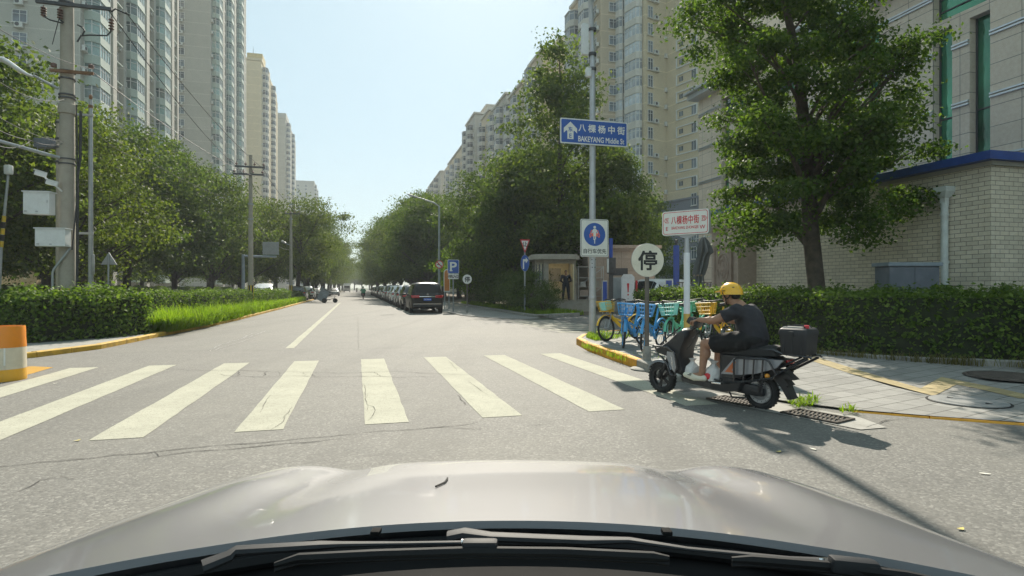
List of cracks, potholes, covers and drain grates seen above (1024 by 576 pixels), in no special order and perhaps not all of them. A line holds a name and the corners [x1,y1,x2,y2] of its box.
drain grate [780,408,855,424]
manhole cover [925,395,1014,409]
manhole cover [962,370,1024,382]
drain grate [706,395,753,407]
